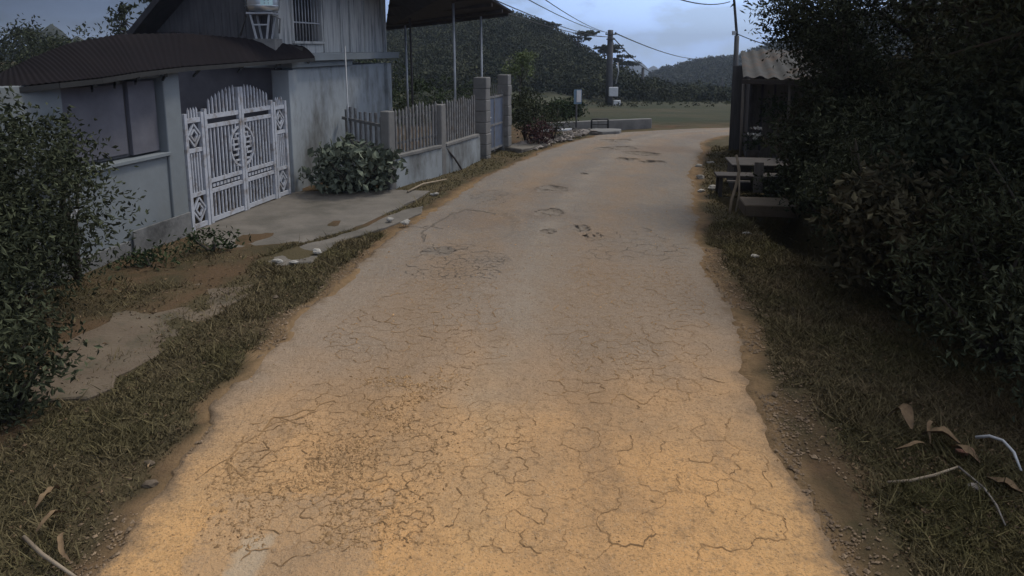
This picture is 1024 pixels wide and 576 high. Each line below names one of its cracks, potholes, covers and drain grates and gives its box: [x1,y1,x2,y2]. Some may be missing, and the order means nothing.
pothole [528,183,573,193]
crack [318,191,513,386]
pothole [528,206,571,218]
pothole [564,223,596,235]
crack [586,227,688,263]
crack [197,377,548,566]
crack [557,416,788,560]
pothole [534,227,562,236]
crack [543,264,728,408]
